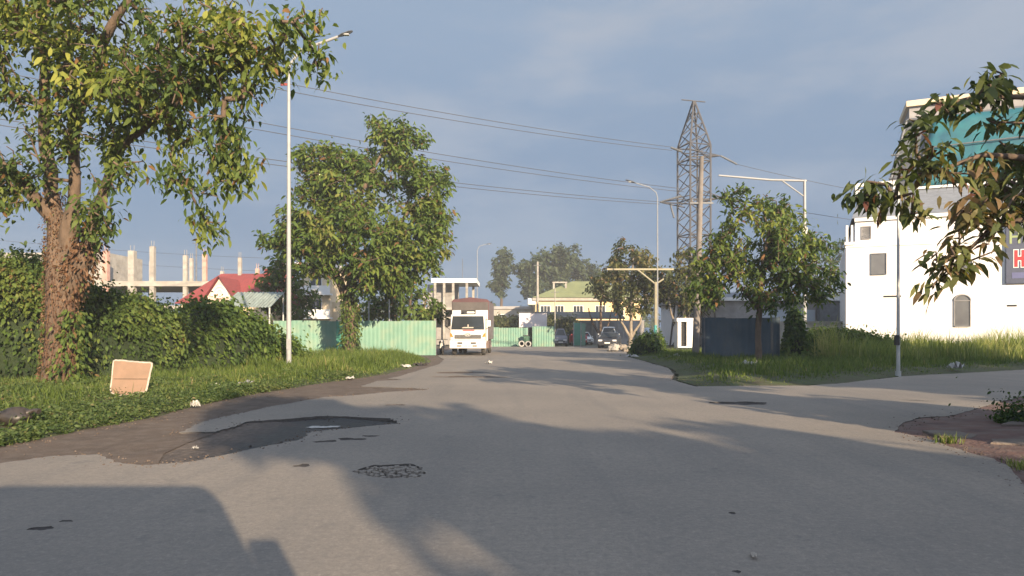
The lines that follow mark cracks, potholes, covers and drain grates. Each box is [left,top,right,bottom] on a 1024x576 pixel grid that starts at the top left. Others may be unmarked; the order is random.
pothole [354,464,424,478]
pothole [146,417,397,464]
